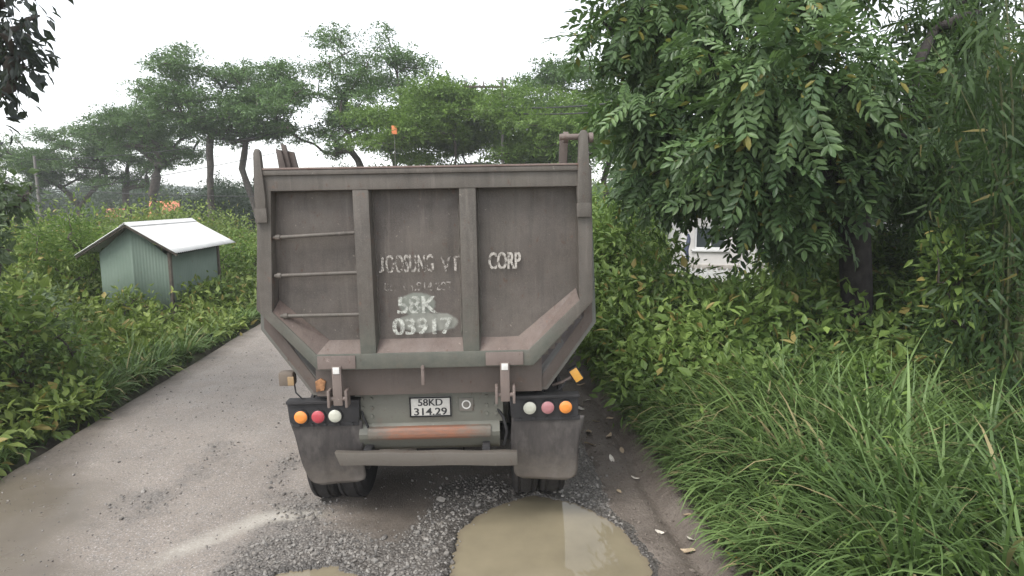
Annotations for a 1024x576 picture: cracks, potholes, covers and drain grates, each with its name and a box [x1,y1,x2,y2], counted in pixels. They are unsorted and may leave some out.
pothole [436,490,662,576]
pothole [254,557,379,576]
